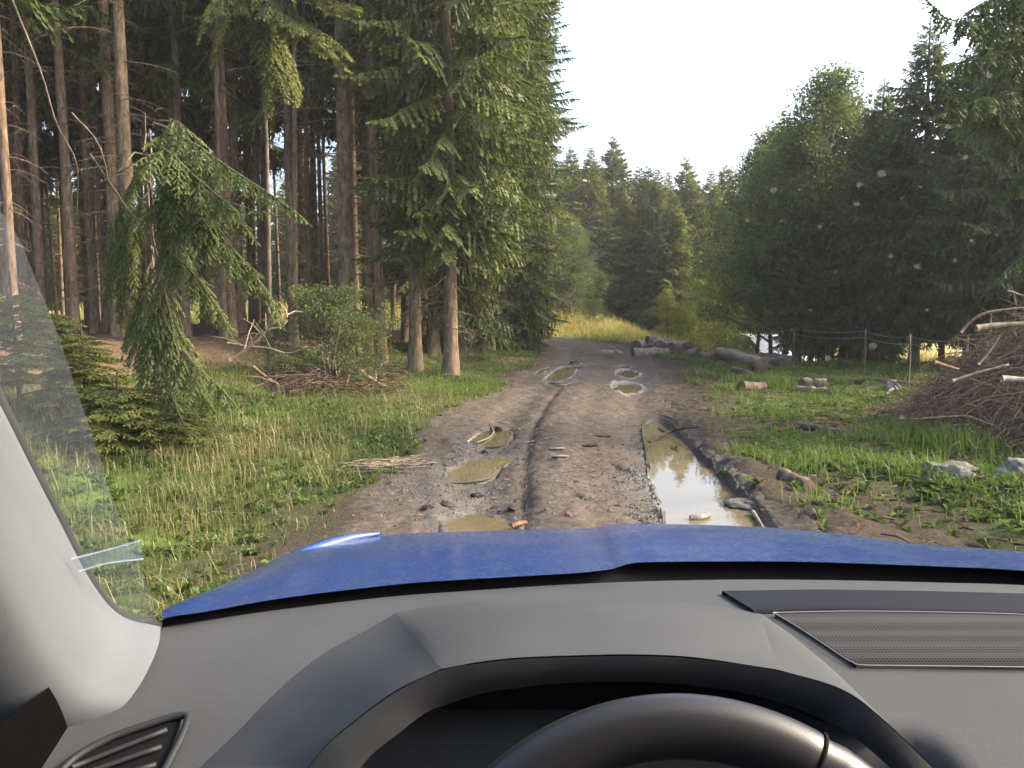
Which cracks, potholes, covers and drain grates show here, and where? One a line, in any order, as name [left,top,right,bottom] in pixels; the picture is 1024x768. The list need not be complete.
pothole [465,427,514,449]
pothole [438,513,525,532]
pothole [443,455,527,485]
pothole [613,368,642,379]
pothole [541,365,577,385]
pothole [608,380,646,397]
